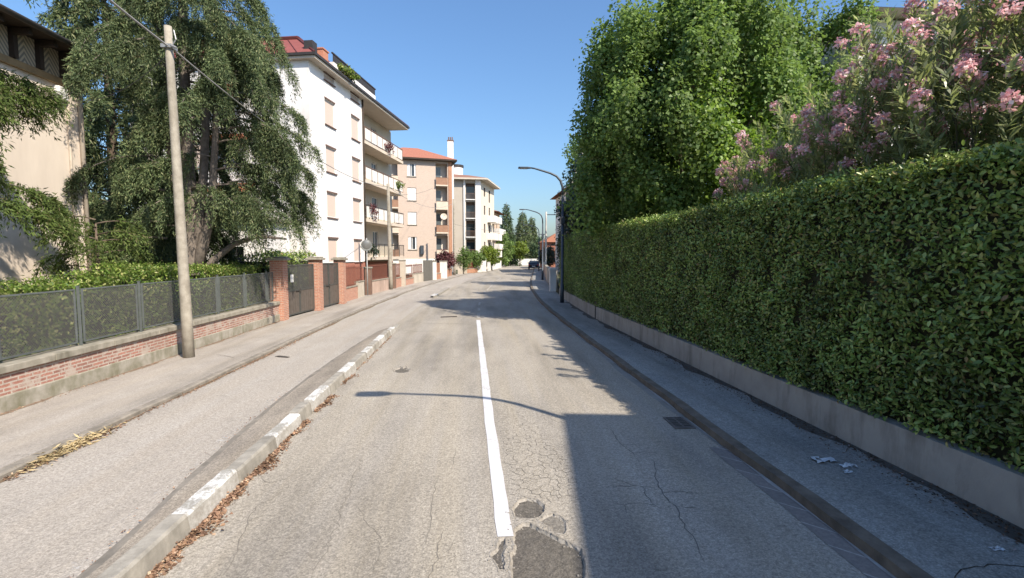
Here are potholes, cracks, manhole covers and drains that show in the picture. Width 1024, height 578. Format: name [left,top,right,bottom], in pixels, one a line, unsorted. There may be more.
crack [426,483,453,578]
crack [496,389,585,502]
pothole [538,512,568,534]
pothole [511,496,545,520]
pothole [489,537,508,570]
crack [954,564,1024,578]
crack [608,433,703,559]
drain grate [663,417,696,429]
pothole [508,522,588,578]
crack [221,476,290,578]
